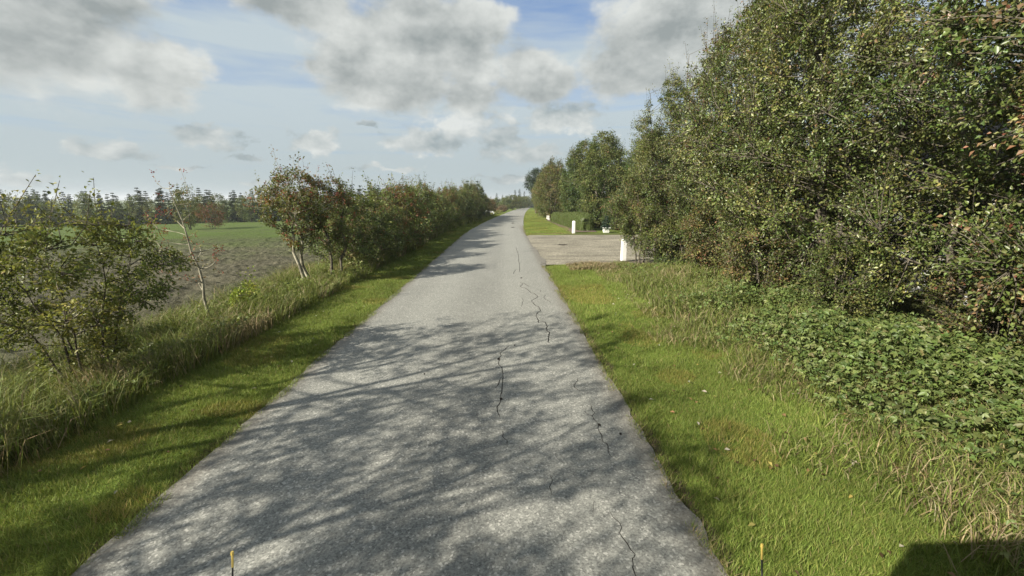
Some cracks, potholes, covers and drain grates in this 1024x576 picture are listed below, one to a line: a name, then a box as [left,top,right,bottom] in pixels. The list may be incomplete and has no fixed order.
crack [495,345,510,441]
crack [593,503,636,576]
crack [513,248,550,342]
crack [574,379,611,456]
